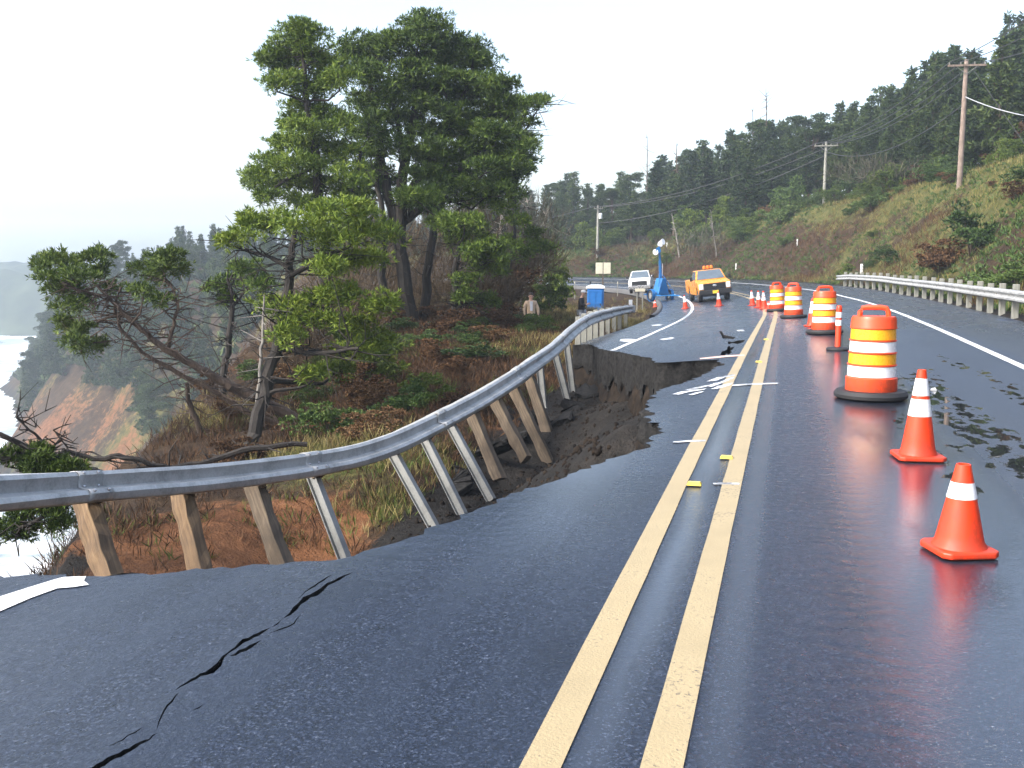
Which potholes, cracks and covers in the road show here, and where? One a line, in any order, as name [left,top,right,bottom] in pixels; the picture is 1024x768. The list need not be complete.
crack [92,573,351,768]
